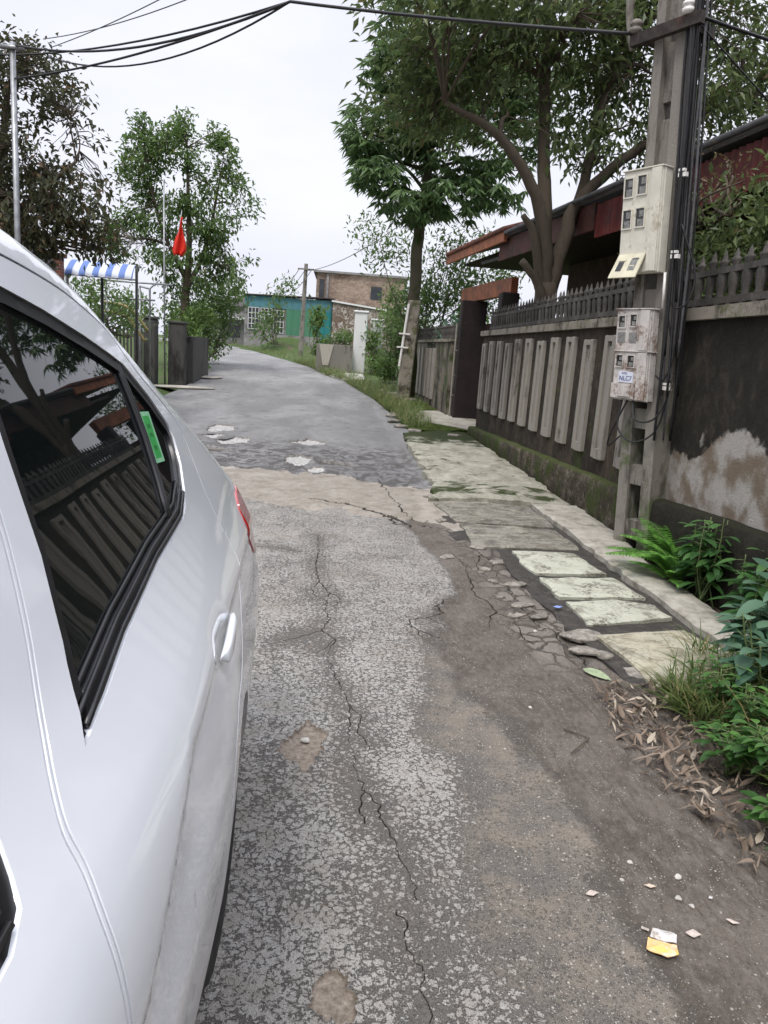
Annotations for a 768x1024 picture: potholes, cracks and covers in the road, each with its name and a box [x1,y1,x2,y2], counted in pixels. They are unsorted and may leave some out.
pothole [272,717,332,778]
pothole [304,965,362,1024]
crack [255,497,597,1024]
